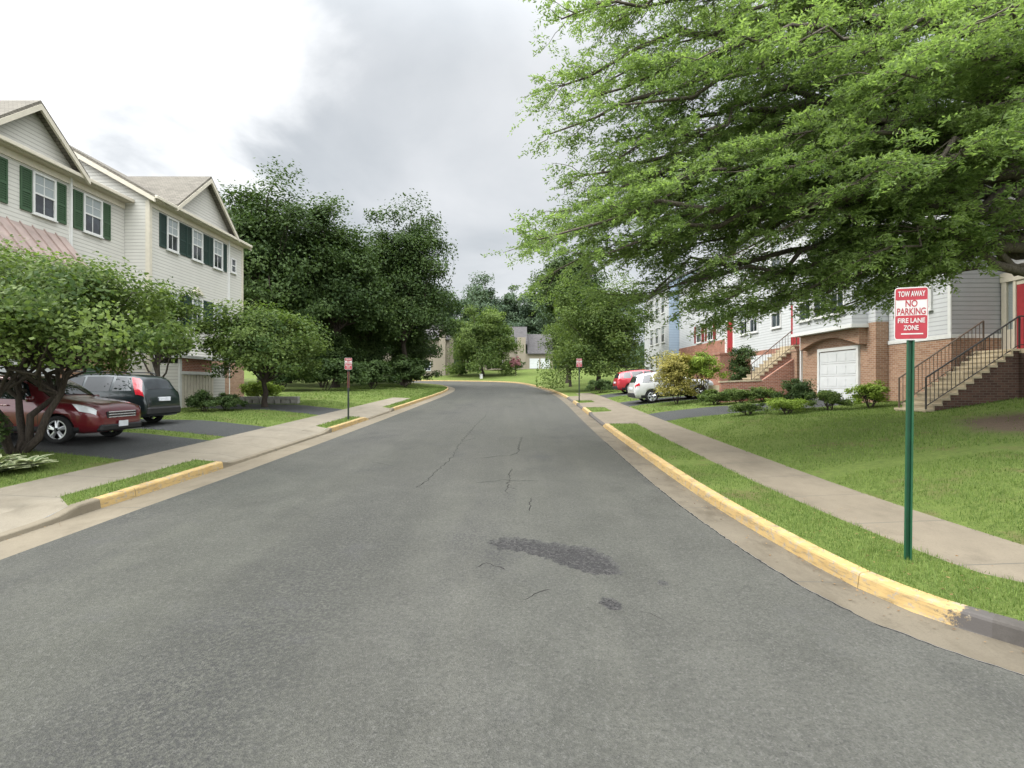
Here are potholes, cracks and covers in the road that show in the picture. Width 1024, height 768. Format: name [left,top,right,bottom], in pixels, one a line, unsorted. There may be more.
crack [477,437,535,511]
